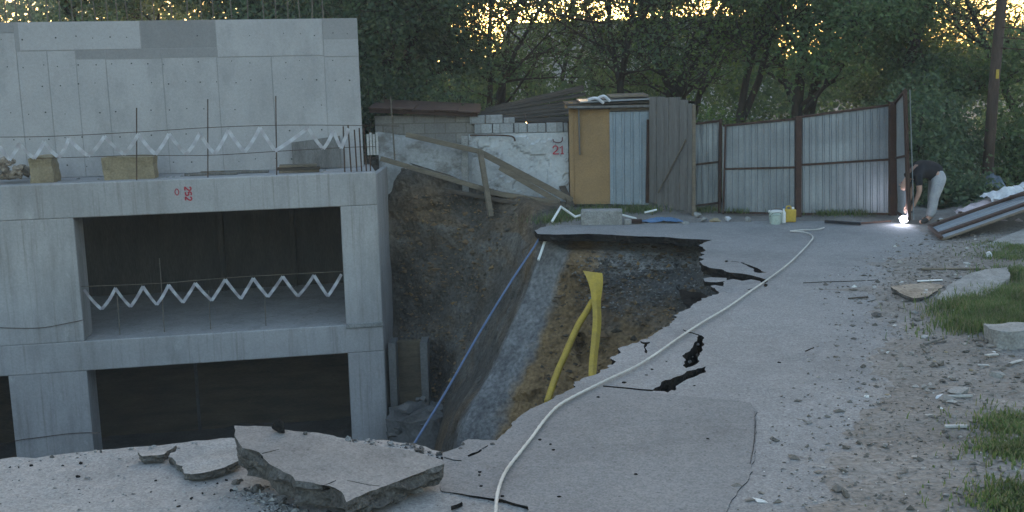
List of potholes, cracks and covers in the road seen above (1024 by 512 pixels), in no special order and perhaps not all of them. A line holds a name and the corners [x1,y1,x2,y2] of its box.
crack [323,480,378,491]
crack [451,502,463,510]
crack [640,330,706,392]
crack [725,260,768,287]
